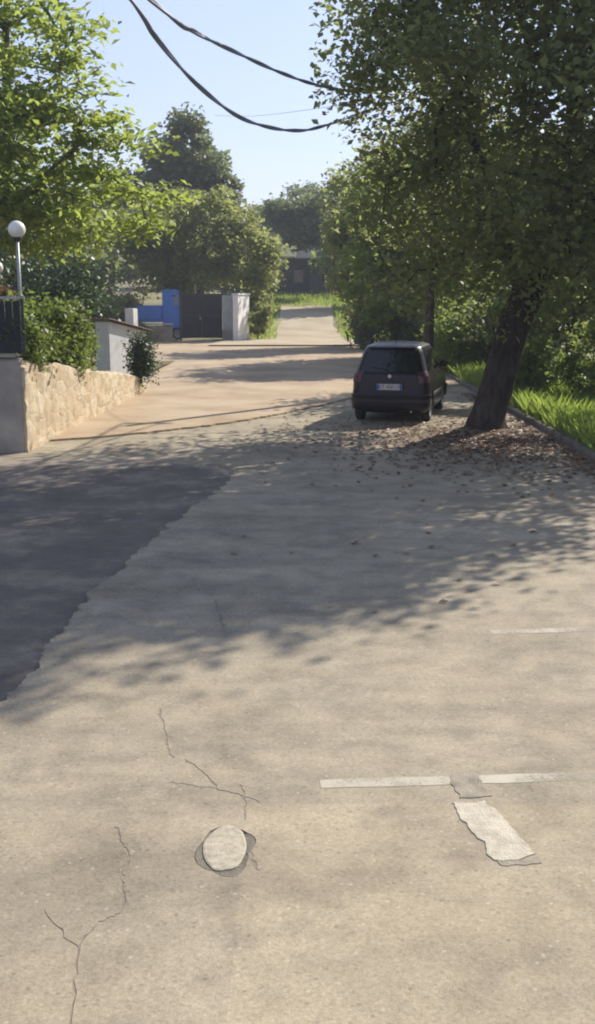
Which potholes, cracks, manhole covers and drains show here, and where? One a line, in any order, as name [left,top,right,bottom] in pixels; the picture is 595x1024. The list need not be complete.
crack [44,827,130,1024]
crack [214,600,225,629]
crack [158,709,259,821]
